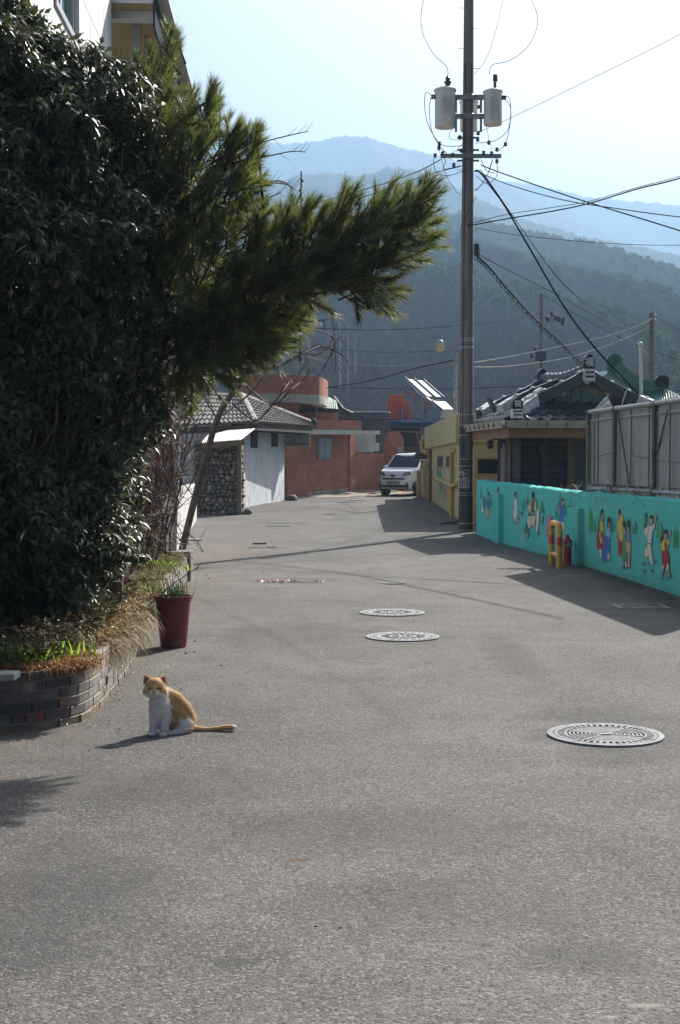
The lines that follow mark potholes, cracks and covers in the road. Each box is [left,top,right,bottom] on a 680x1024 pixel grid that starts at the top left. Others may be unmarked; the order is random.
manhole cover [366,632,440,642]
manhole cover [547,723,665,747]
